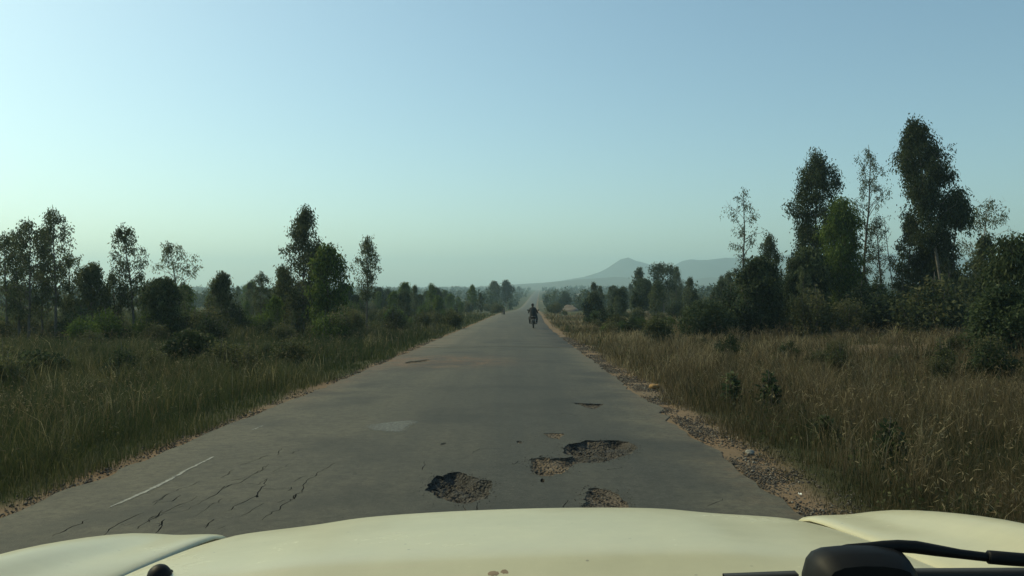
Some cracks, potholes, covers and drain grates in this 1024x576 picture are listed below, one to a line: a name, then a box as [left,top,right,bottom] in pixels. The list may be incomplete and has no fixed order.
pothole [512,438,643,477]
pothole [419,471,496,506]
crack [54,448,338,535]
pothole [573,484,636,508]
